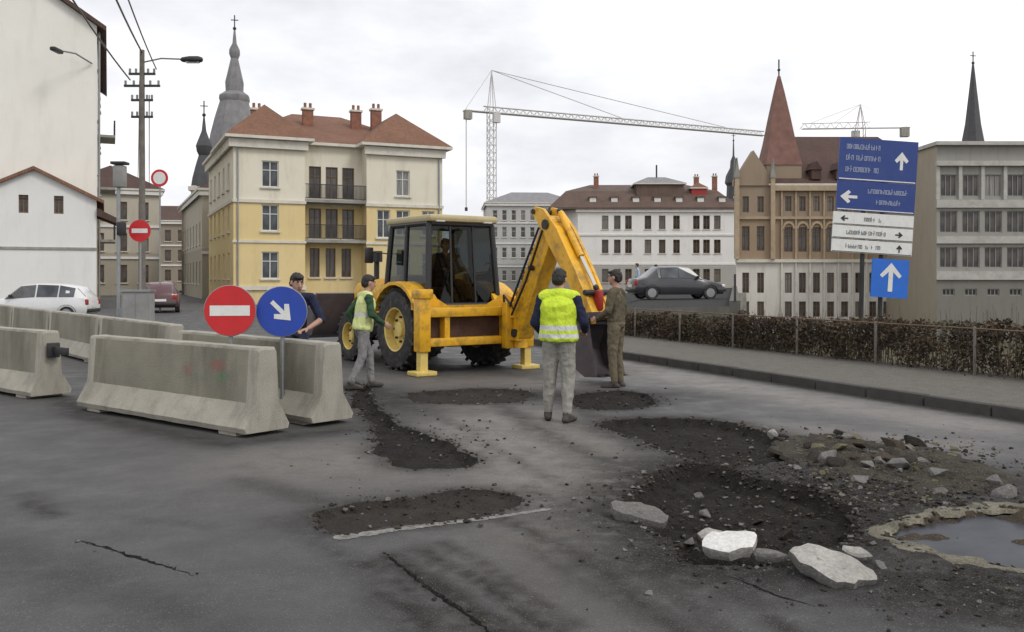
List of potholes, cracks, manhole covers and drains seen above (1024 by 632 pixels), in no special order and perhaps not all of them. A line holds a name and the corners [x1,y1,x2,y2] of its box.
crack [80,540,194,576]
pothole [866,501,1024,573]
crack [384,553,491,632]
pothole [627,463,859,568]
crack [727,576,815,607]
